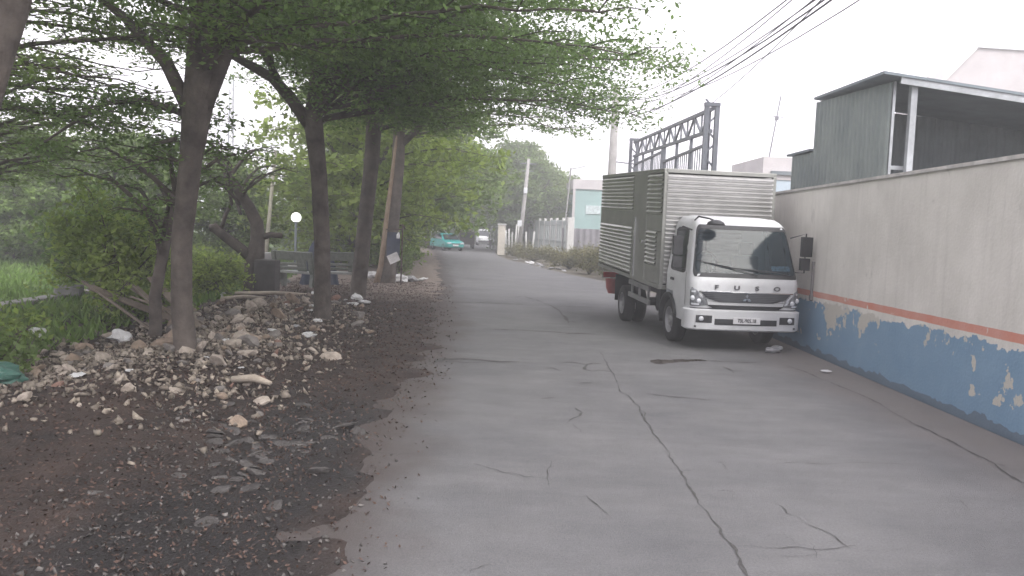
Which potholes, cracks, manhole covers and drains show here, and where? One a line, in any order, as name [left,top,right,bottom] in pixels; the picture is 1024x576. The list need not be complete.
crack [457,296,605,334]
crack [552,352,902,576]
